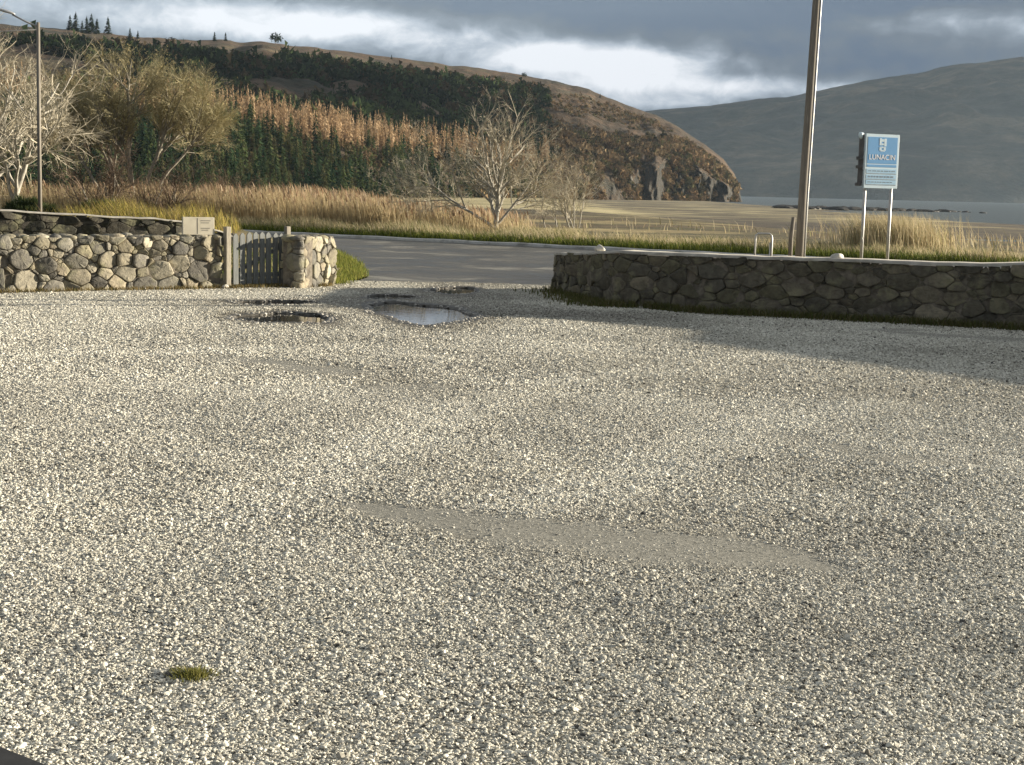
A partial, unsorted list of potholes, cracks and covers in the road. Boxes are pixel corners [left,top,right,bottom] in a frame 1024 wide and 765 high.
pothole [361,299,485,327]
pothole [226,310,338,324]
pothole [423,286,481,295]
